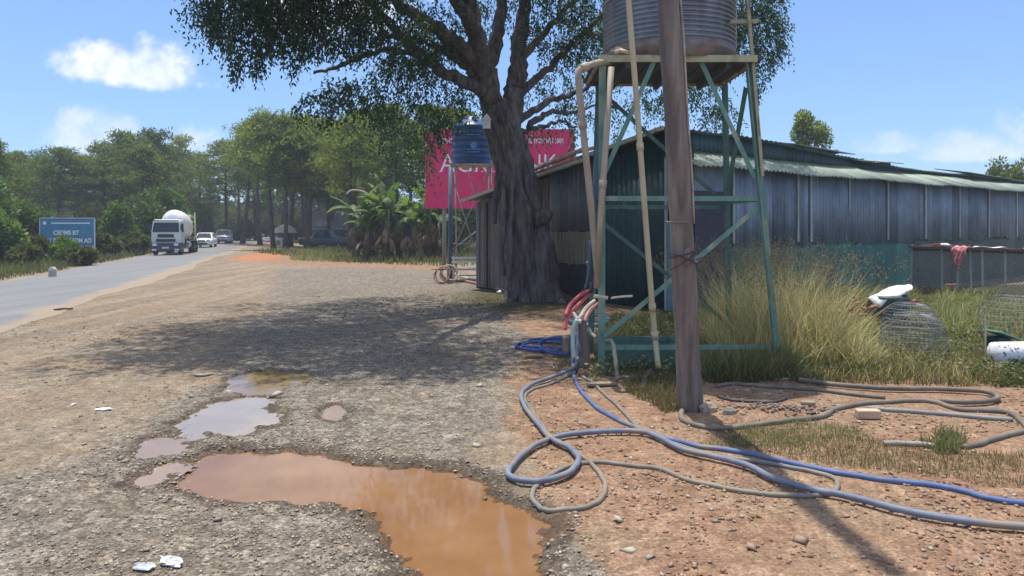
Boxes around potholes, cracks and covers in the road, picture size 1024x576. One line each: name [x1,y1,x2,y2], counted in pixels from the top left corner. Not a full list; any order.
pothole [136,436,593,576]
pothole [108,429,220,464]
pothole [150,392,299,445]
pothole [207,365,325,398]
